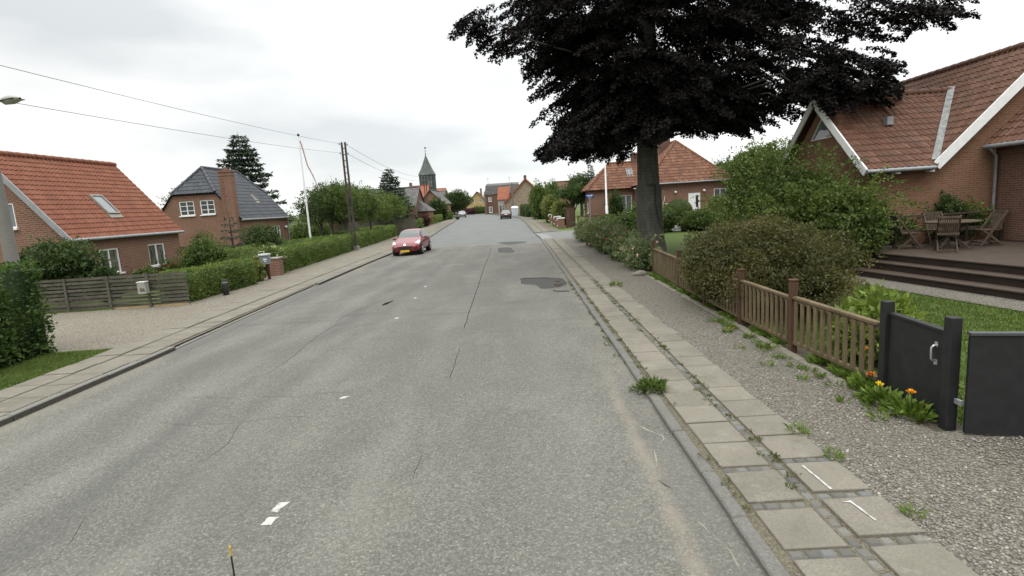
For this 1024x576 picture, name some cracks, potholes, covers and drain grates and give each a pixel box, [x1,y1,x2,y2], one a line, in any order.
crack [169,416,303,457]
